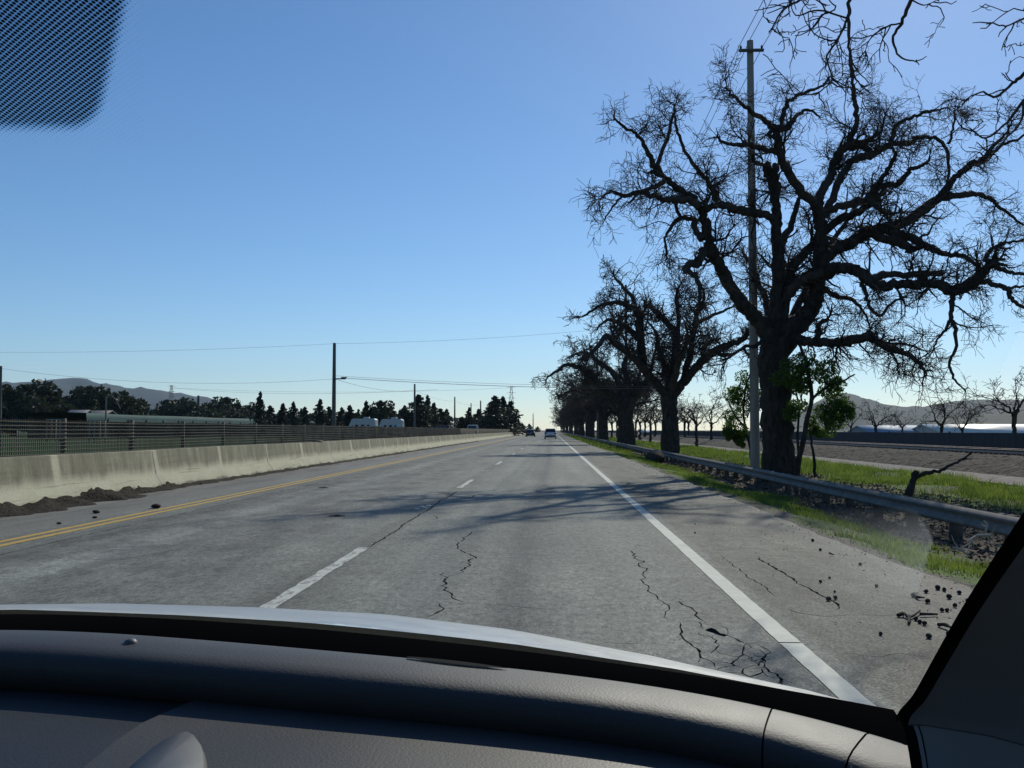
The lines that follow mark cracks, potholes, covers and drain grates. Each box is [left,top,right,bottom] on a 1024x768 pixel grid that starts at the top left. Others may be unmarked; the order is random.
crack [721,550,892,616]
crack [424,532,567,618]
crack [631,547,792,685]
